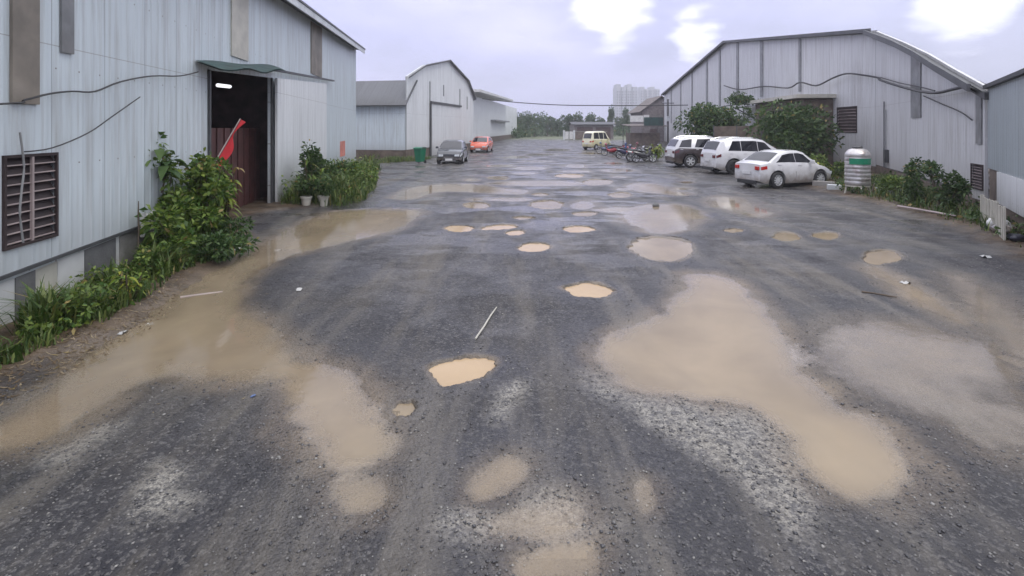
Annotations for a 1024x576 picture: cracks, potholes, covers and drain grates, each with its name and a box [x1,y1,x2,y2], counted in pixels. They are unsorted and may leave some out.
pothole [806,231,845,241]
pothole [472,223,523,231]
pothole [419,351,506,390]
pothole [380,394,427,424]
pothole [857,249,910,266]
pothole [558,224,601,233]
pothole [512,241,556,253]
pothole [621,235,700,263]
pothole [768,231,808,242]
pothole [557,279,621,300]
pothole [439,224,482,233]
